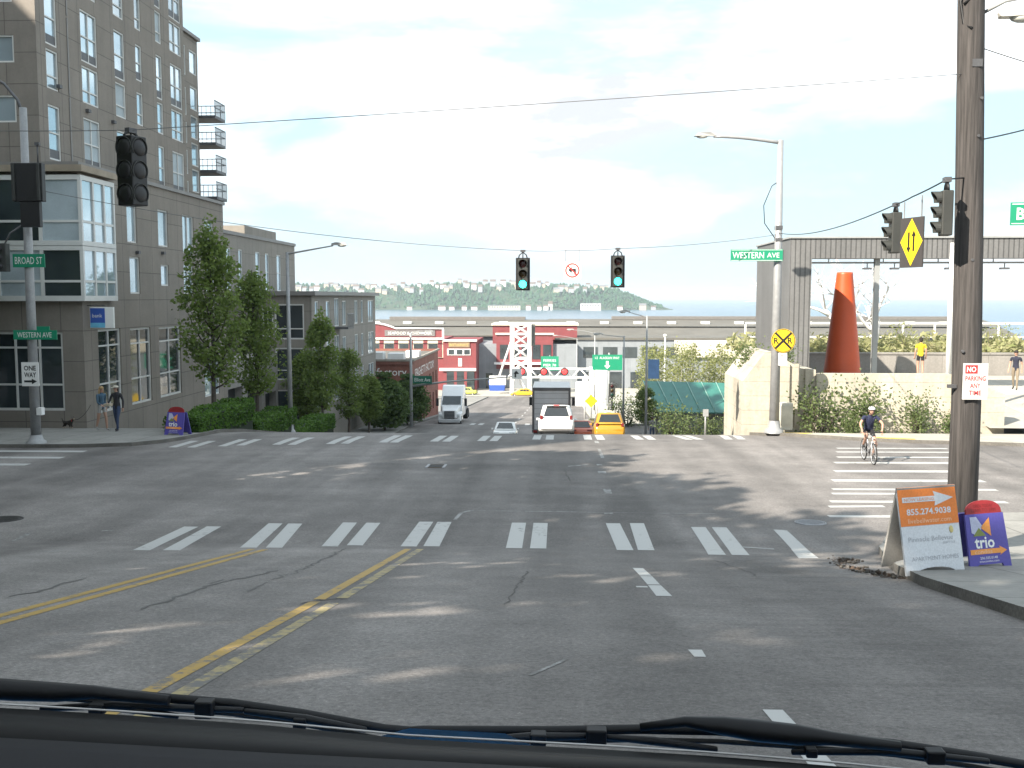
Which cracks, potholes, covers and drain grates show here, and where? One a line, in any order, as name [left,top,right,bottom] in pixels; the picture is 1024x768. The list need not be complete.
crack [9,578,85,597]
crack [141,548,346,610]
crack [504,571,529,605]
pothole [827,555,906,579]
